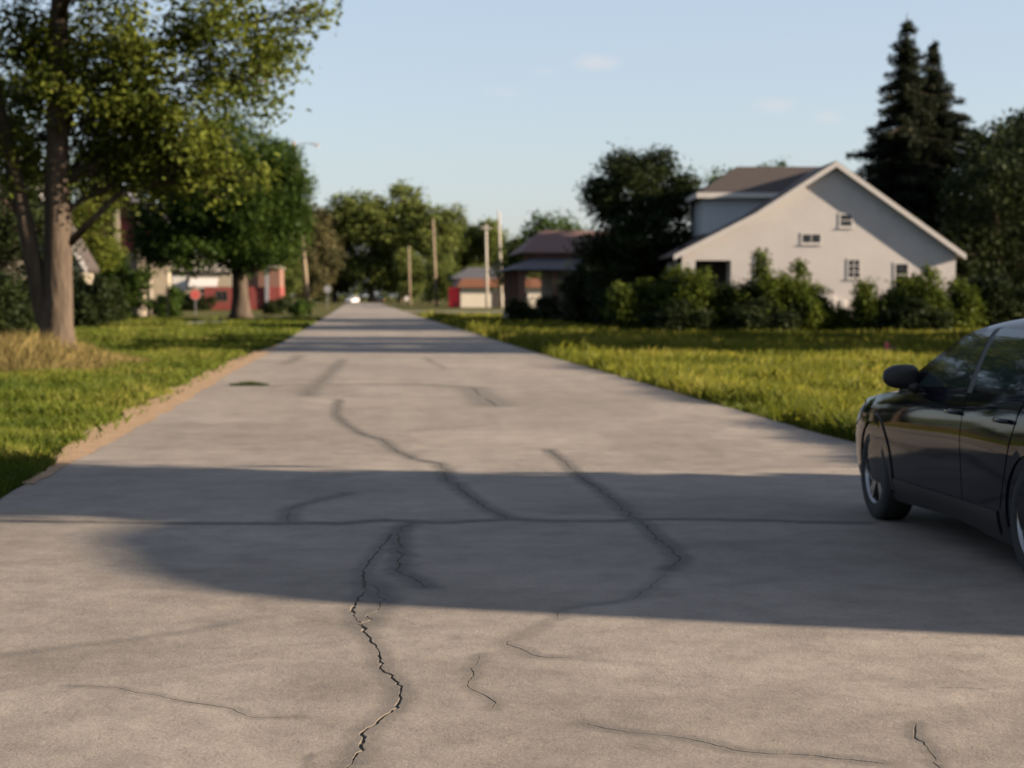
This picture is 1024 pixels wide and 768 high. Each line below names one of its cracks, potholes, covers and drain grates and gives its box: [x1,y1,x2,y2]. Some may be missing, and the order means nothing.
crack [3,357,836,768]
crack [913,723,940,768]
crack [586,723,893,765]
